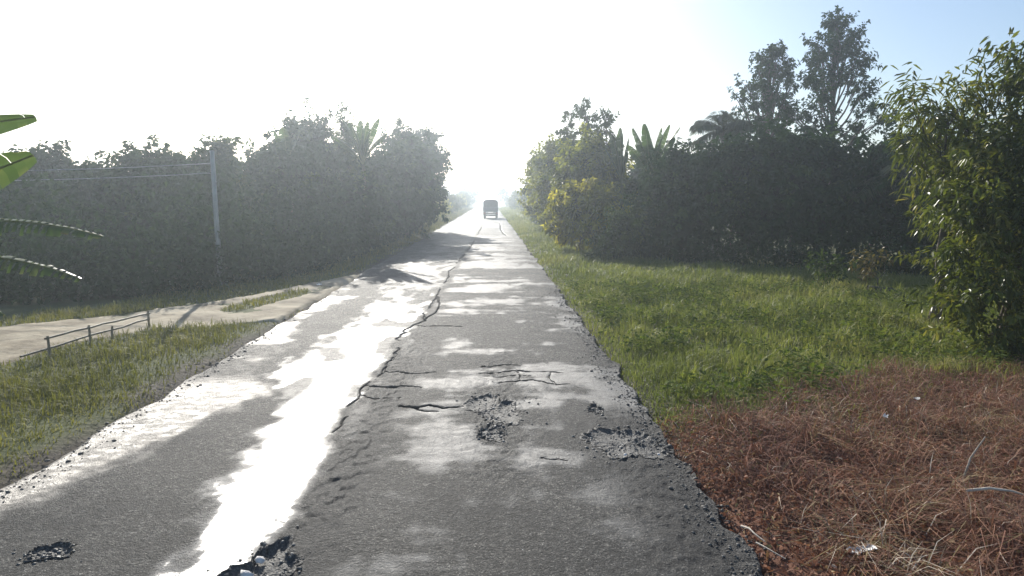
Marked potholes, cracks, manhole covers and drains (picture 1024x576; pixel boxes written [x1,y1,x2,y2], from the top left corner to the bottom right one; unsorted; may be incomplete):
crack [479,364,570,385]
pothole [445,381,548,441]
crack [332,227,482,433]
pothole [564,417,728,476]
pothole [207,523,311,576]
pothole [12,539,82,566]
pothole [587,401,611,418]
